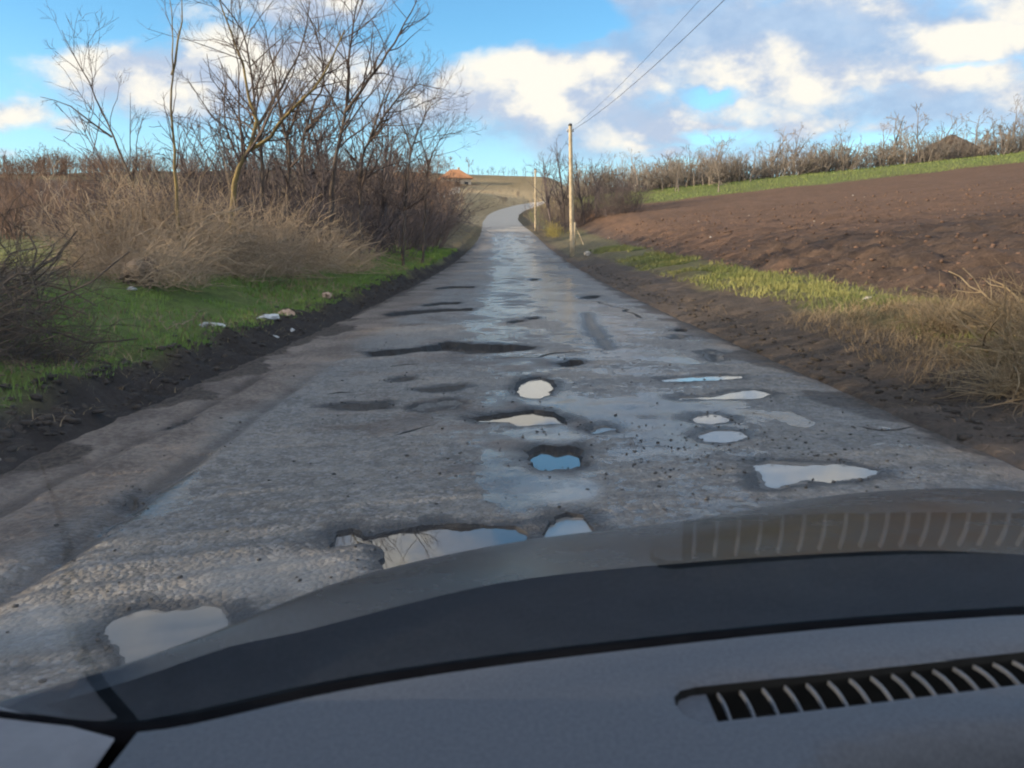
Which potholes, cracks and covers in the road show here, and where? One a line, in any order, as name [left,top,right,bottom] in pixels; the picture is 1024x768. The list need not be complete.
pothole [104,601,232,666]
pothole [513,377,557,399]
pothole [751,461,879,489]
pothole [470,409,567,426]
pothole [367,342,535,357]
